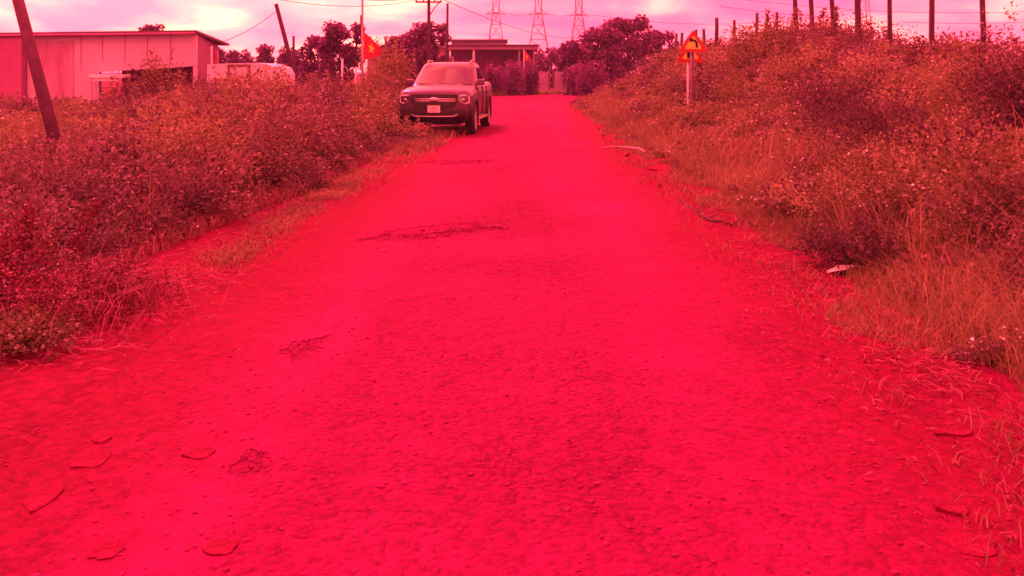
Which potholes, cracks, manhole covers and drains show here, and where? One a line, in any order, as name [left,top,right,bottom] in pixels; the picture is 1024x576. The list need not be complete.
pothole [355,222,510,242]
pothole [277,334,336,363]
pothole [226,448,275,479]
